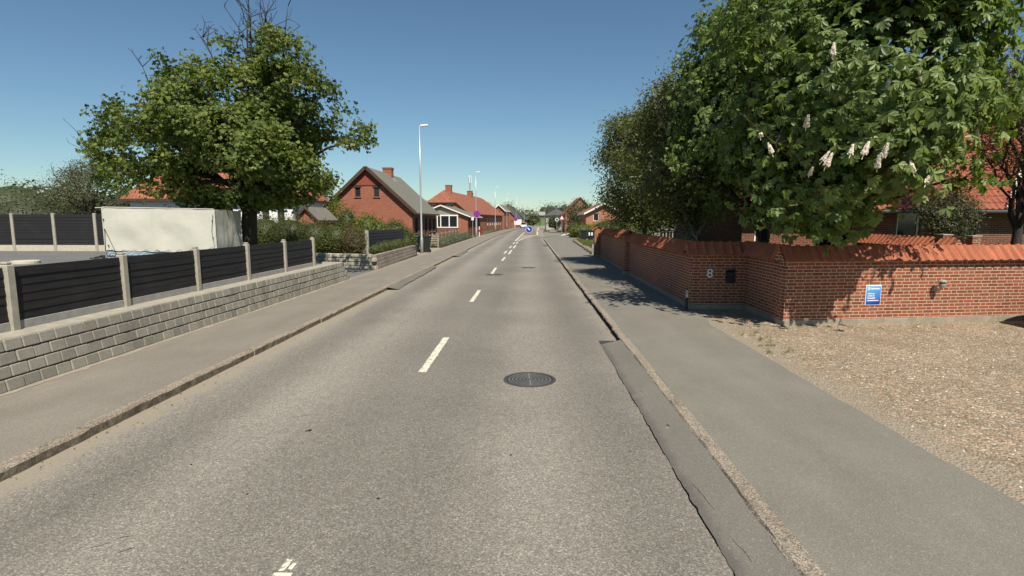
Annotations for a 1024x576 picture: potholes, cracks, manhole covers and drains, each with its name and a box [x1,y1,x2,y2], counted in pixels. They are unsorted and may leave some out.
manhole cover [503,372,556,387]
